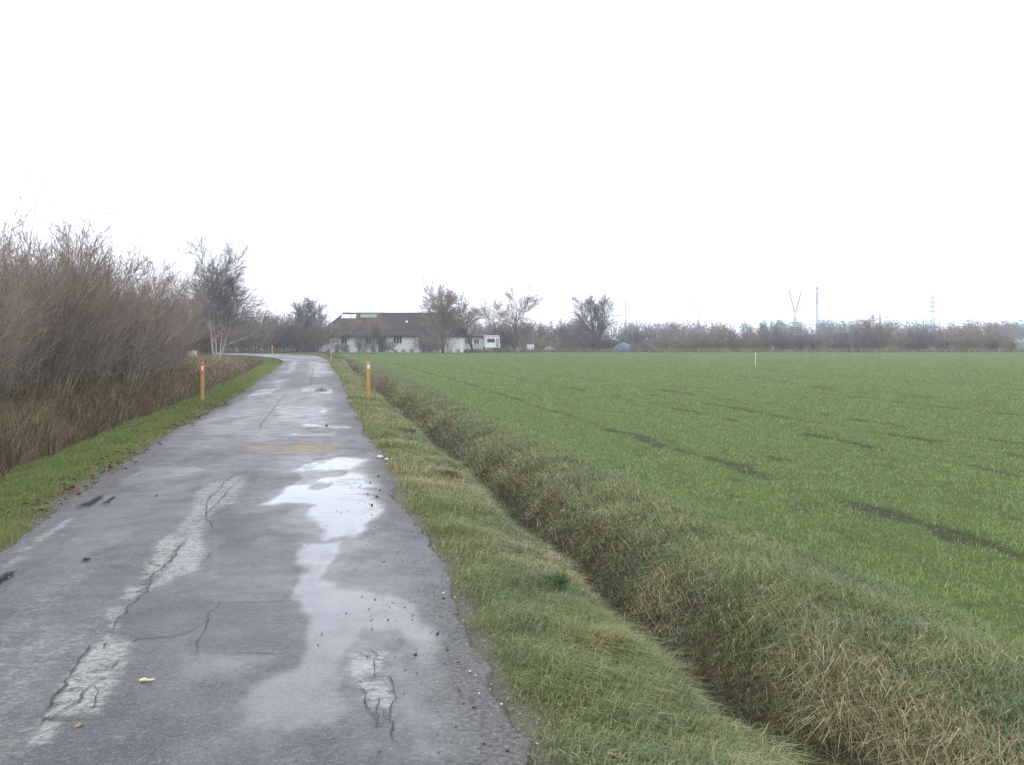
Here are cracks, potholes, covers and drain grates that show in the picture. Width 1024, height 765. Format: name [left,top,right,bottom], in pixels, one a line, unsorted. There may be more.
crack [202,475,242,530]
pothole [76,494,105,508]
crack [33,539,207,731]
pothole [0,570,17,585]
crack [355,650,399,744]
